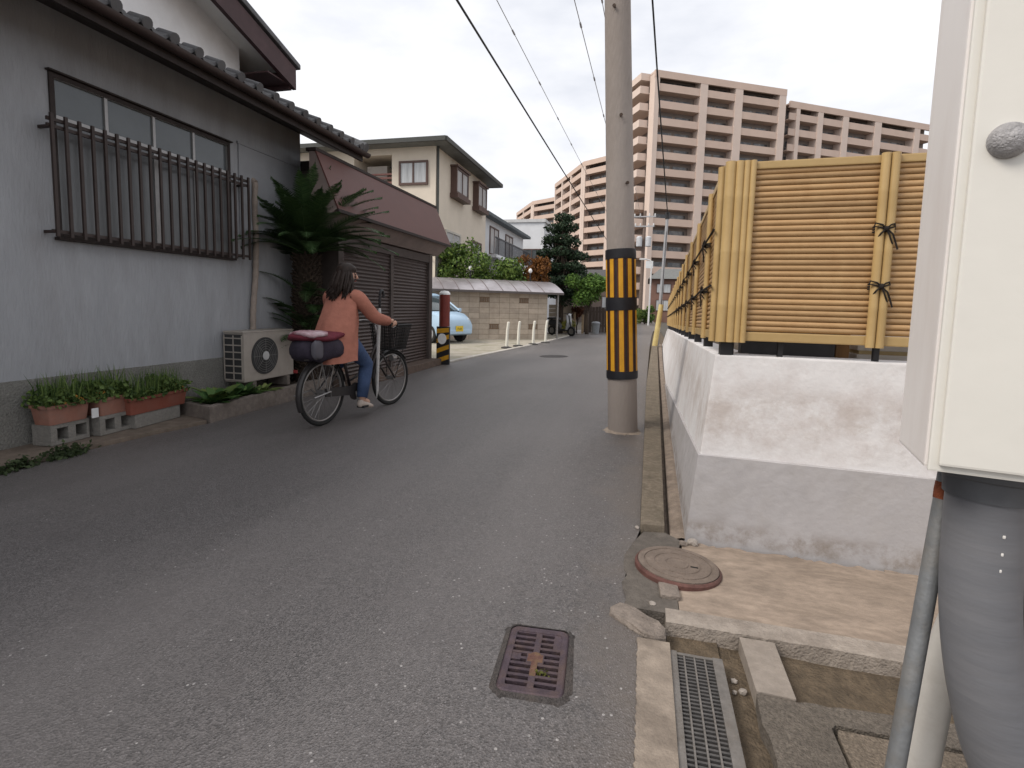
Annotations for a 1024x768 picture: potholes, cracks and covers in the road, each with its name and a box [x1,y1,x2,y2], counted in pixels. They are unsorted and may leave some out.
manhole cover [635,546,722,591]
drain grate [670,650,746,768]
drain grate [489,623,575,708]
